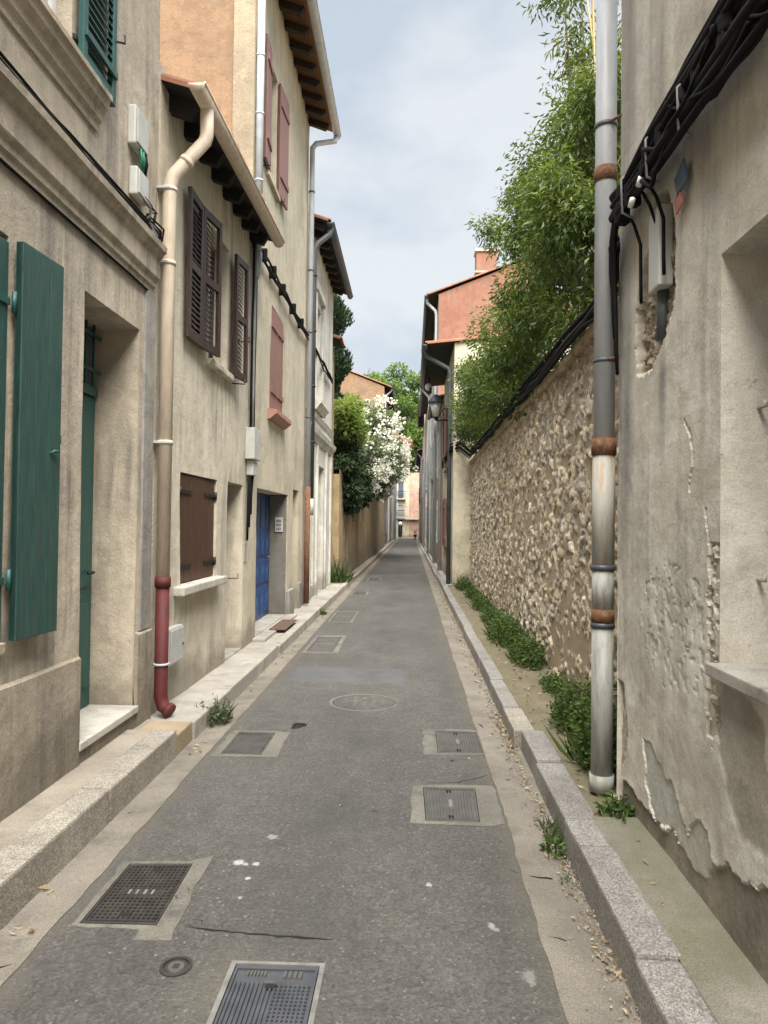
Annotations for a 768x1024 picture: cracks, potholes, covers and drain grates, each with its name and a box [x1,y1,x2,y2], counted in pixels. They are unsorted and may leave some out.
manhole cover [302,635,346,654]
manhole cover [159,956,193,977]
manhole cover [328,611,359,623]
manhole cover [329,694,399,712]
crack [188,919,332,940]
